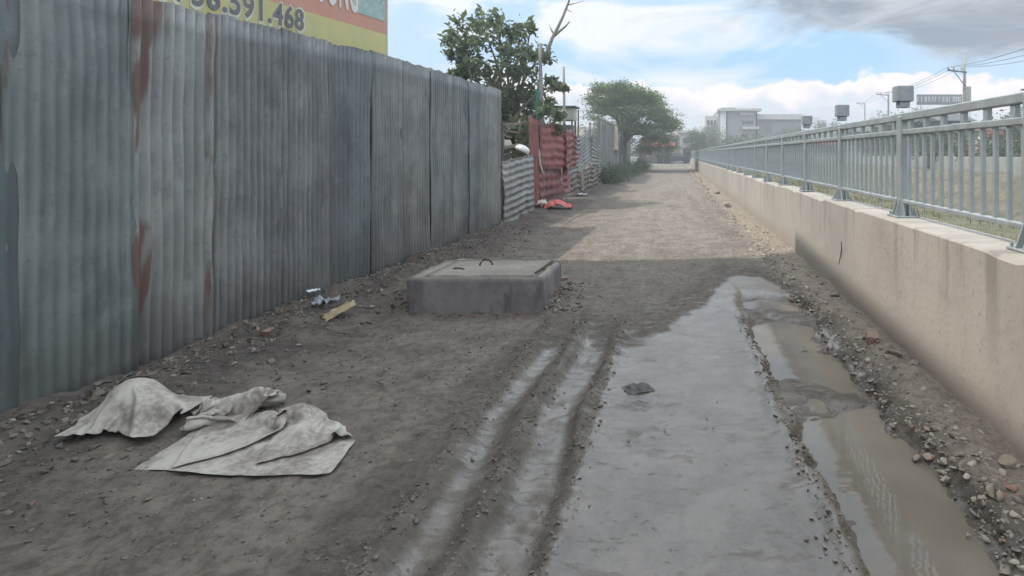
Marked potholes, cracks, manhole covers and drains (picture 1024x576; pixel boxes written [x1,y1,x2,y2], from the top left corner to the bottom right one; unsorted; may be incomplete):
manhole cover [426,259,553,278]
